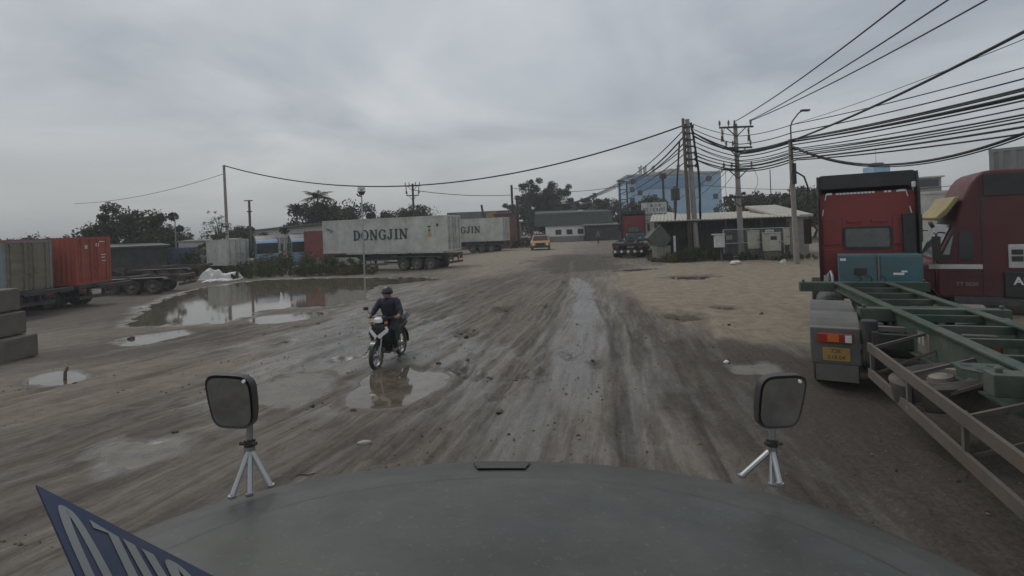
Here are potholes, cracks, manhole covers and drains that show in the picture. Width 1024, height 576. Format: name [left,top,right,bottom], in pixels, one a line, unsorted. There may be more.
pothole [100,329,201,347]
pothole [9,369,104,391]
pothole [327,364,464,419]
